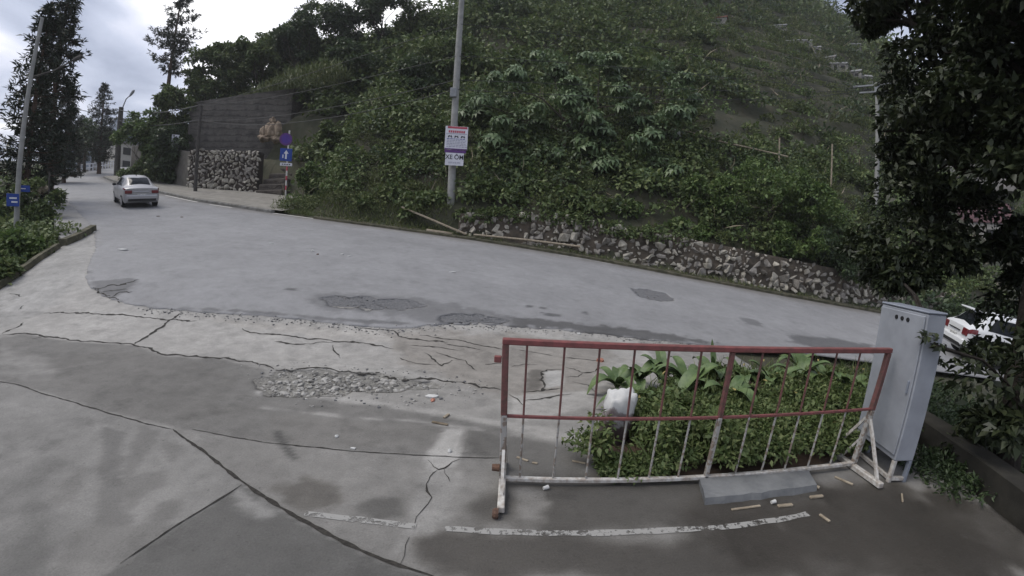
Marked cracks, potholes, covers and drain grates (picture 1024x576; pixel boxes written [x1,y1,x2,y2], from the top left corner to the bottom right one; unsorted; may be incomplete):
crack [3,279,597,405]
pothole [253,368,442,398]
crack [194,429,498,566]
